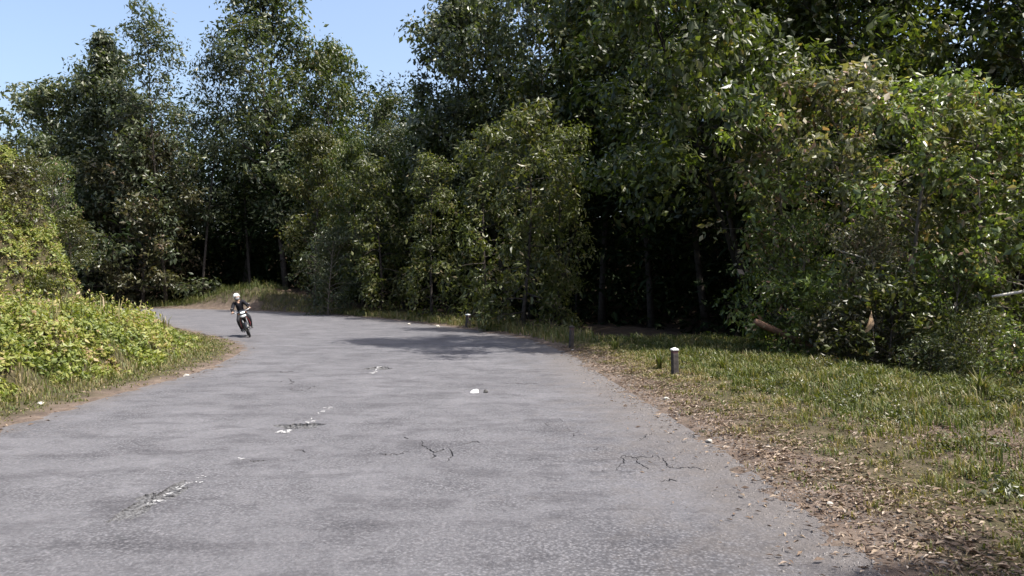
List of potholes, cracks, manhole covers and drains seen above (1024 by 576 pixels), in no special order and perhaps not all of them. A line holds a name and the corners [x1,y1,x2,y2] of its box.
crack [545,419,708,482]
crack [382,437,480,462]
pothole [106,480,189,523]
